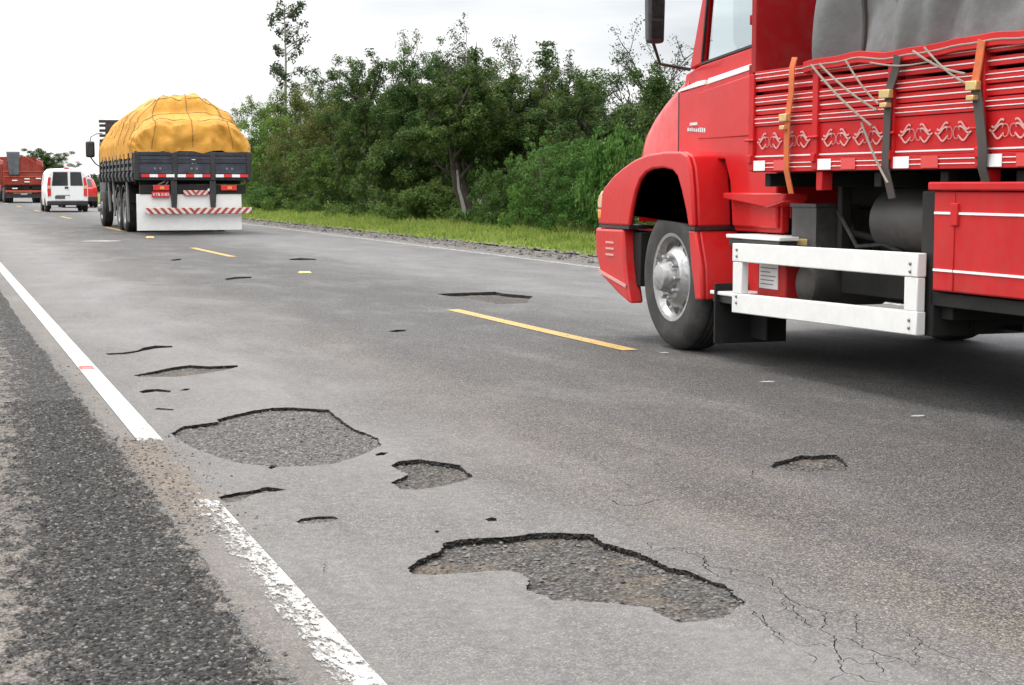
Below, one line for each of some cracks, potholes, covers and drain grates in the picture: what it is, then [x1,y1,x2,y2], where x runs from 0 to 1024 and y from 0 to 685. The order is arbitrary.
pothole [296,516,338,524]
pothole [218,487,286,503]
pothole [171,407,381,469]
pothole [771,455,848,472]
pothole [391,459,473,490]
pothole [105,346,173,355]
pothole [135,365,238,377]
crack [647,542,996,684]
pothole [439,292,533,304]
pothole [407,532,745,622]
